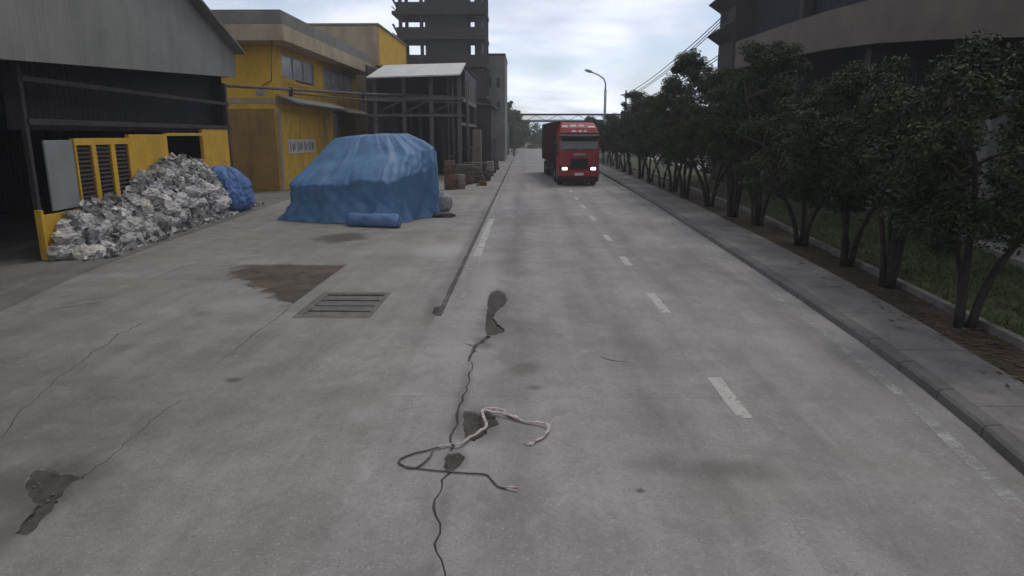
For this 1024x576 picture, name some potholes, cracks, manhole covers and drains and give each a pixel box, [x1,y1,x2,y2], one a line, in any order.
pothole [443,452,465,471]
crack [0,320,150,439]
crack [79,399,181,479]
pothole [485,290,507,336]
pothole [461,411,499,441]
crack [432,336,488,576]
pothole [15,468,84,536]
crack [215,308,288,364]
